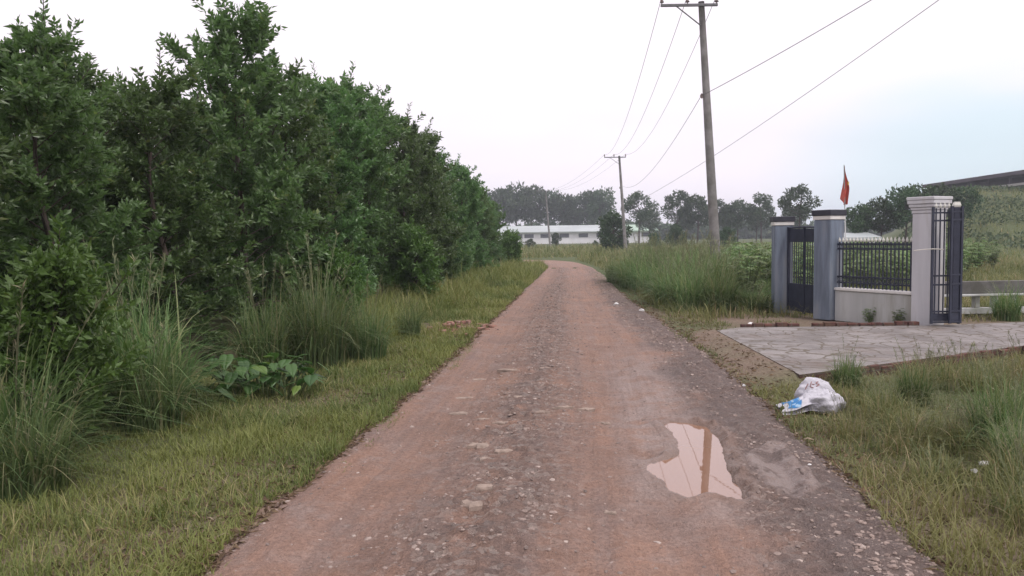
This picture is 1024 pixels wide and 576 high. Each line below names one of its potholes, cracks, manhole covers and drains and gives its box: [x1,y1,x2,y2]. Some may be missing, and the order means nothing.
pothole [632,416,765,505]
